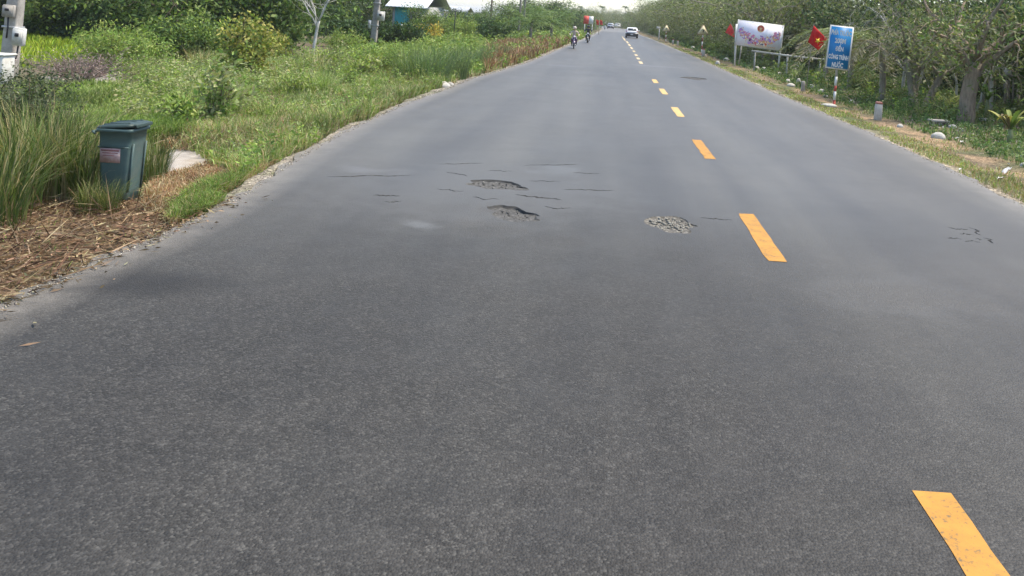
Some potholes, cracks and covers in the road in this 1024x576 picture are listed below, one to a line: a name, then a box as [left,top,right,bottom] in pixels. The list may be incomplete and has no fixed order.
crack [948,227,993,243]
crack [515,164,612,209]
pothole [487,205,540,222]
pothole [466,180,529,191]
pothole [644,216,698,234]
